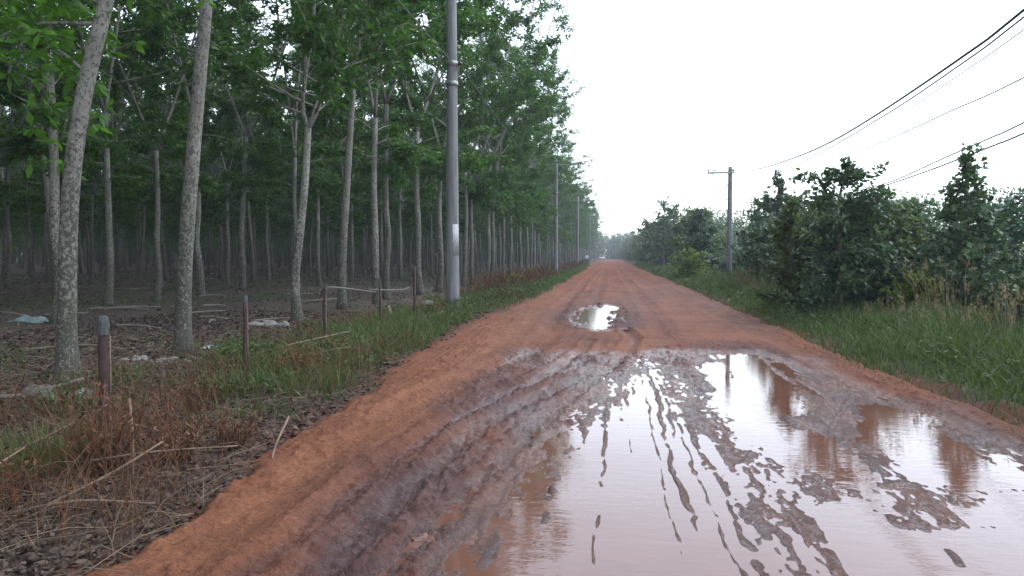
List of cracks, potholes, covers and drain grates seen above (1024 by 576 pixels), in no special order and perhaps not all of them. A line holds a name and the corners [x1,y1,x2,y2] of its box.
pothole [374,356,804,576]
pothole [680,345,904,502]
pothole [558,302,636,332]
pothole [817,392,1024,505]
pothole [775,489,1024,576]
